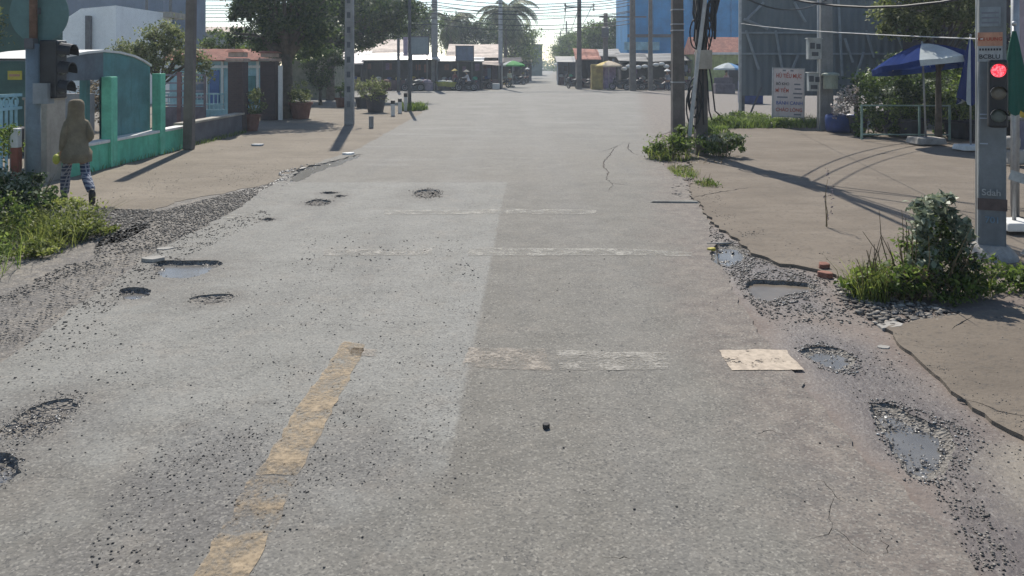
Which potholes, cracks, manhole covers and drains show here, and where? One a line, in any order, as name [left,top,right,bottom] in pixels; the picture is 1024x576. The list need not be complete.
pothole [798,346,858,372]
pothole [736,275,831,304]
pothole [119,285,158,300]
pothole [301,198,336,206]
pothole [710,244,749,267]
pothole [856,403,960,480]
pothole [0,444,37,489]
pothole [187,292,240,307]
pothole [0,391,92,445]
pothole [149,256,223,280]
pothole [281,154,364,182]
crack [815,482,889,553]
